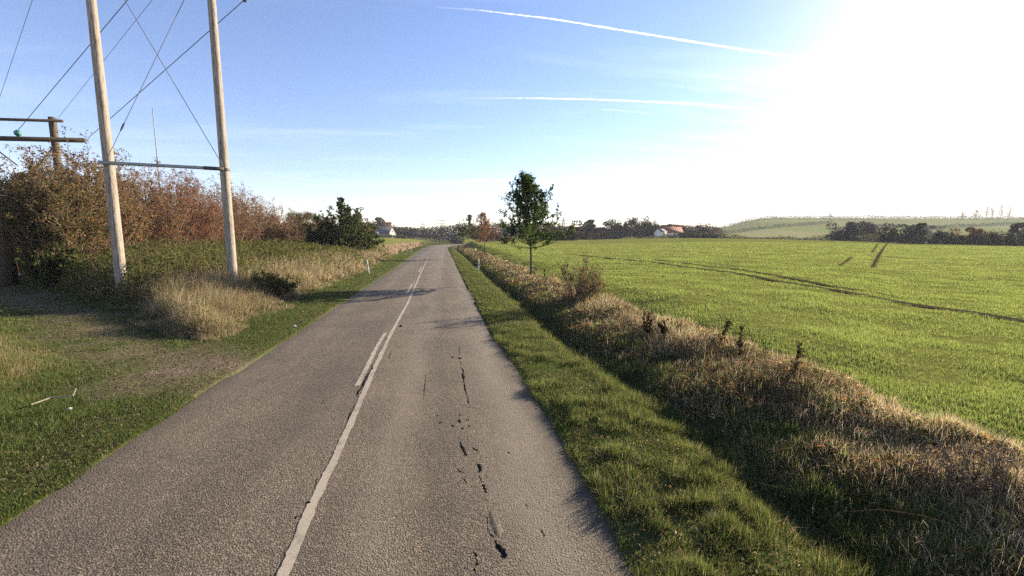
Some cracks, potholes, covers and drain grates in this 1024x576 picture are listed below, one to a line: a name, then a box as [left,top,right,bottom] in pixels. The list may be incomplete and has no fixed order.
pothole [495,540,508,559]
crack [458,346,474,408]
crack [472,517,494,574]
